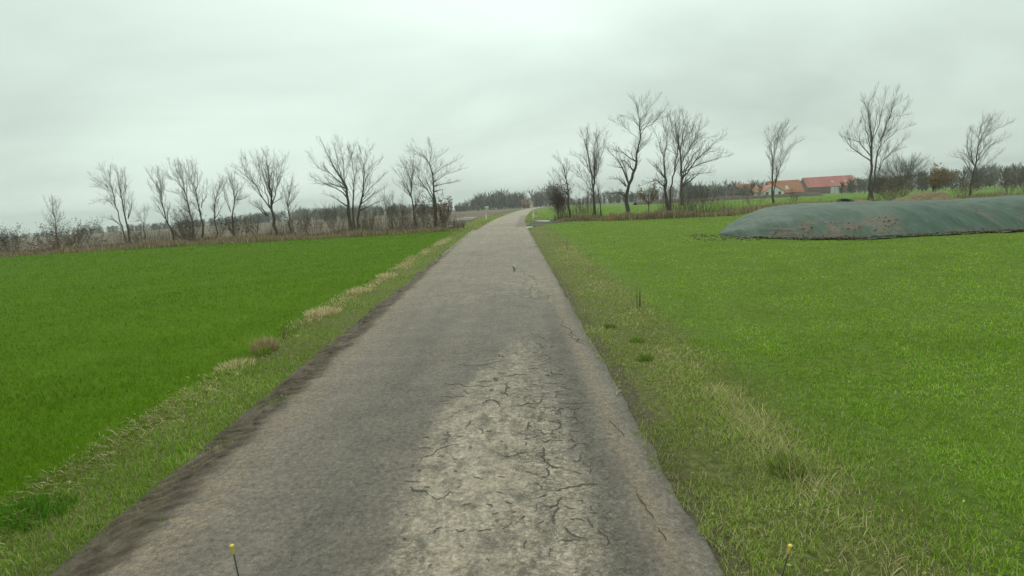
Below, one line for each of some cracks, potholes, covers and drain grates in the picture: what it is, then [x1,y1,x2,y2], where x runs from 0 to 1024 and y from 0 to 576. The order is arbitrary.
crack [405,318,610,556]
